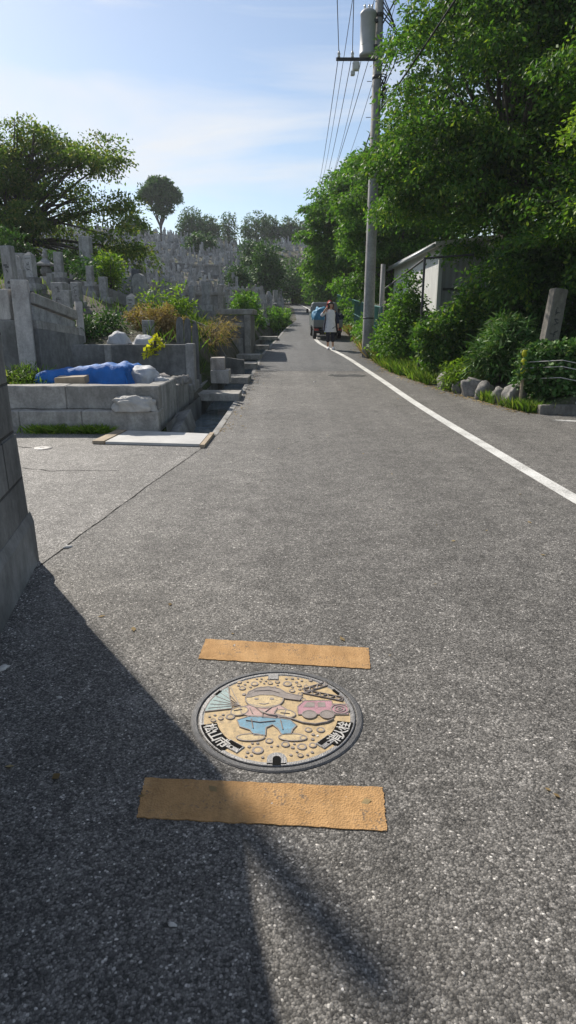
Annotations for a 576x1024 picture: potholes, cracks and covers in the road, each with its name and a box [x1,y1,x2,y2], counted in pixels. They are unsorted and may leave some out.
manhole cover [191,670,363,773]
